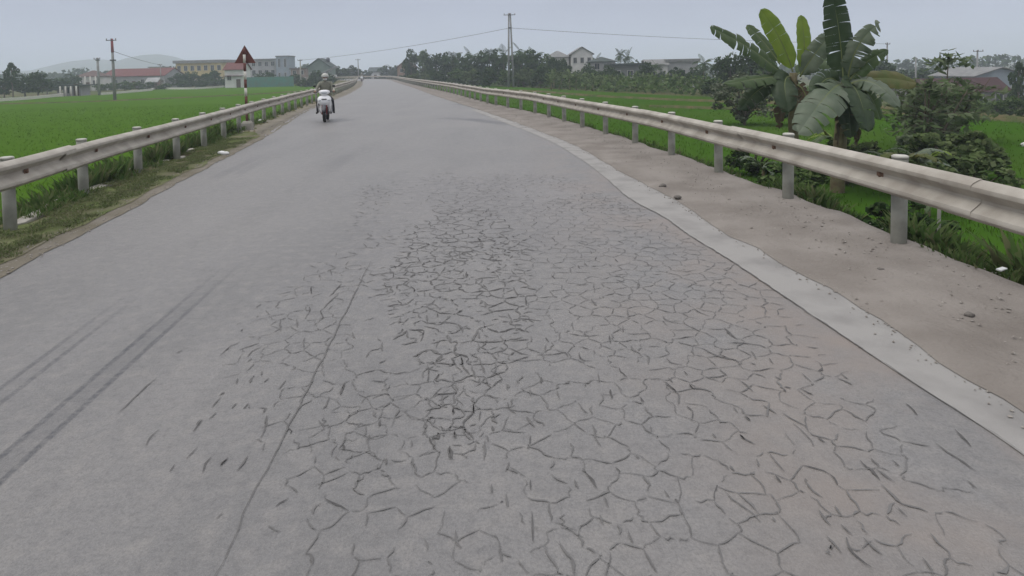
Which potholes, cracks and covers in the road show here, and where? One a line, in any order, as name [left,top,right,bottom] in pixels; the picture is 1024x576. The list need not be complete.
crack [145,173,1024,576]
